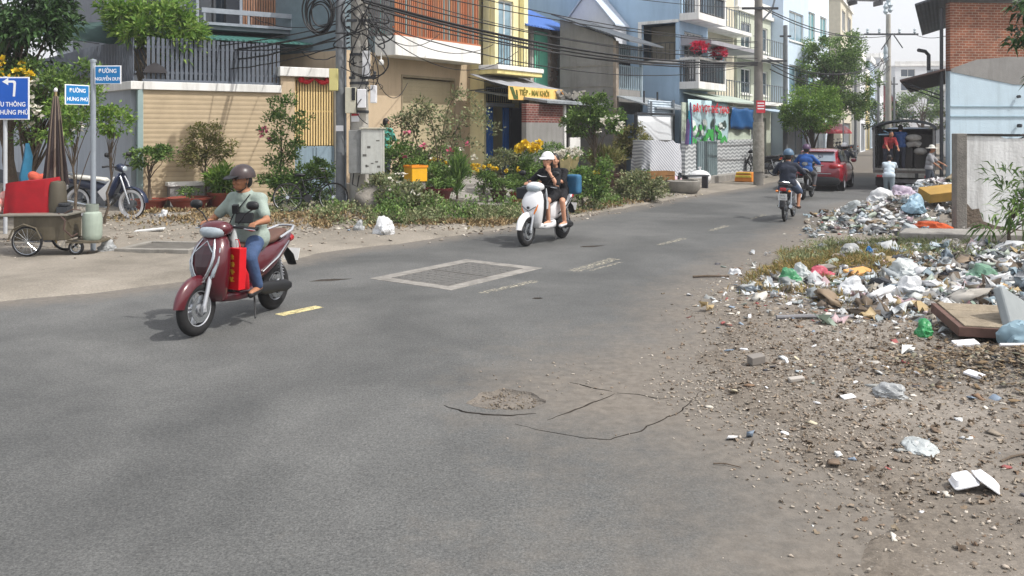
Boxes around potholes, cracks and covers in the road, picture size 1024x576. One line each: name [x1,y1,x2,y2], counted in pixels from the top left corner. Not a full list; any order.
pothole [466,388,546,410]
manhole cover [370,259,541,290]
crack [444,382,701,440]
